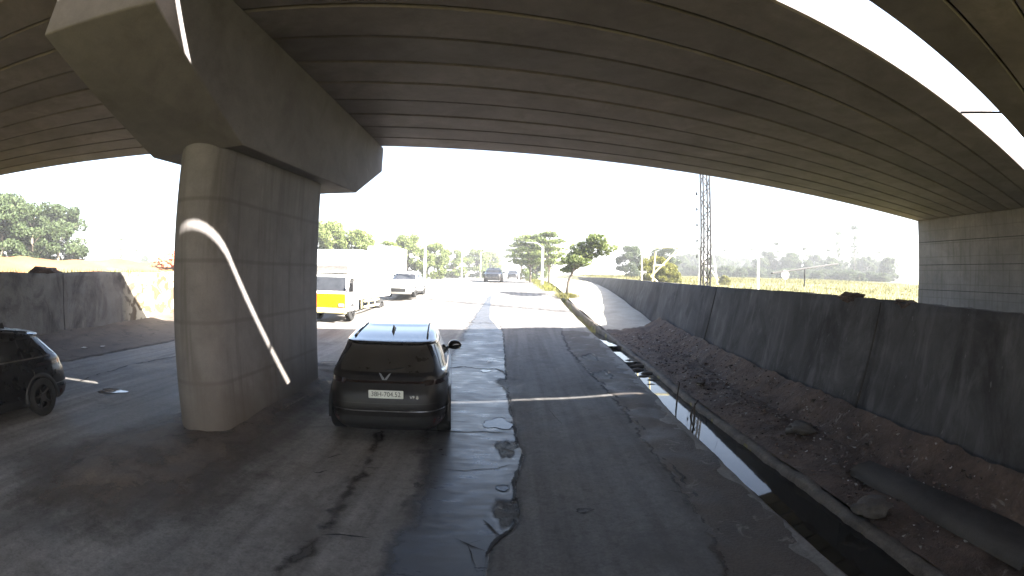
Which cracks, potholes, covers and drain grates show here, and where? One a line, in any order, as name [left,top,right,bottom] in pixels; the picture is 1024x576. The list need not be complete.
pothole [493,500,520,528]
pothole [483,418,513,429]
pothole [495,441,518,458]
